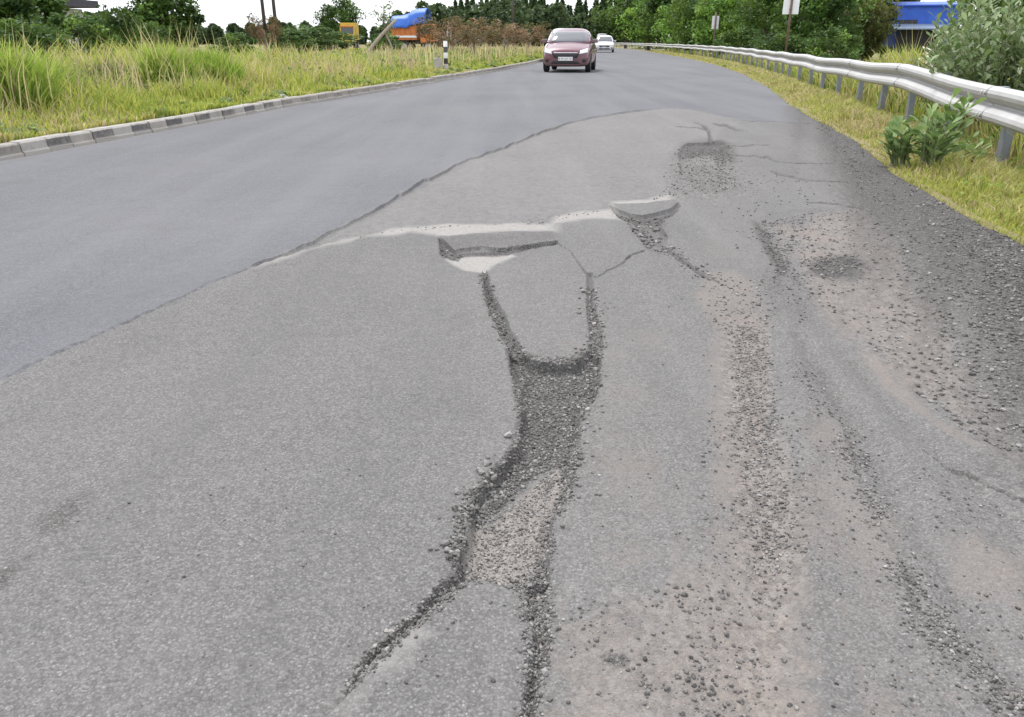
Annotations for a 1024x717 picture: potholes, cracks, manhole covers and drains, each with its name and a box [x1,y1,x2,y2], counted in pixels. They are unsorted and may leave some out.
pothole [252,108,739,267]
pothole [445,347,604,599]
crack [675,120,849,183]
